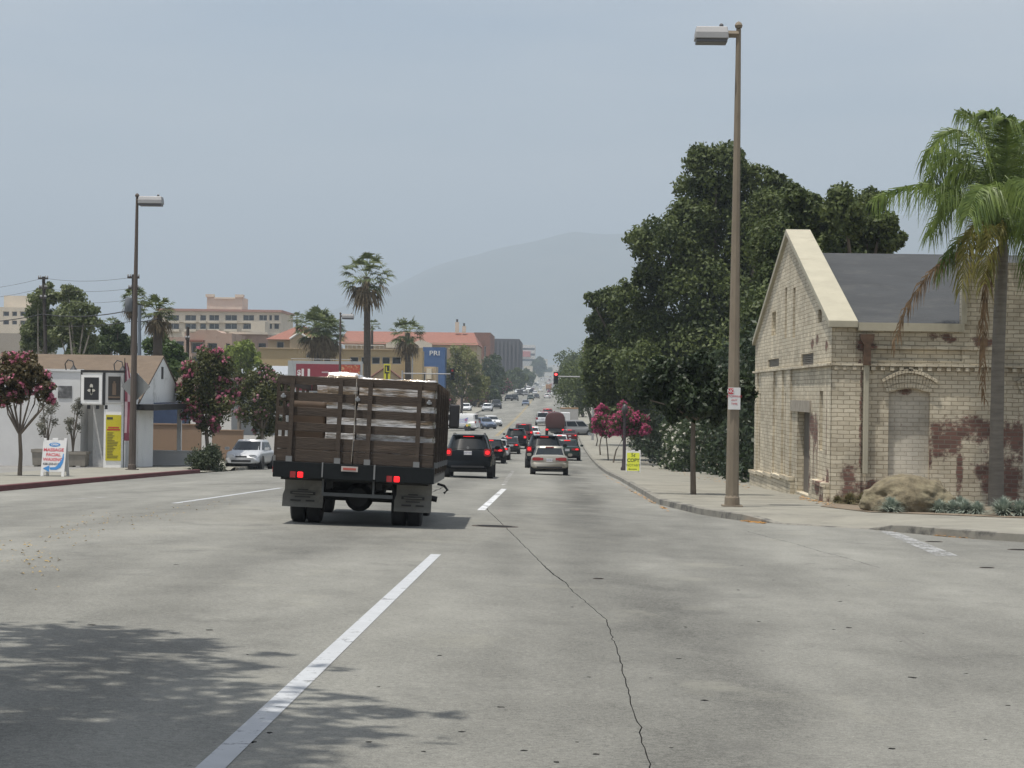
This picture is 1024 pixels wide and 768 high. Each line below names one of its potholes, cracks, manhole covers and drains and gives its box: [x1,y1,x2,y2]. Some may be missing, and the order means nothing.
crack [487,494,651,768]
